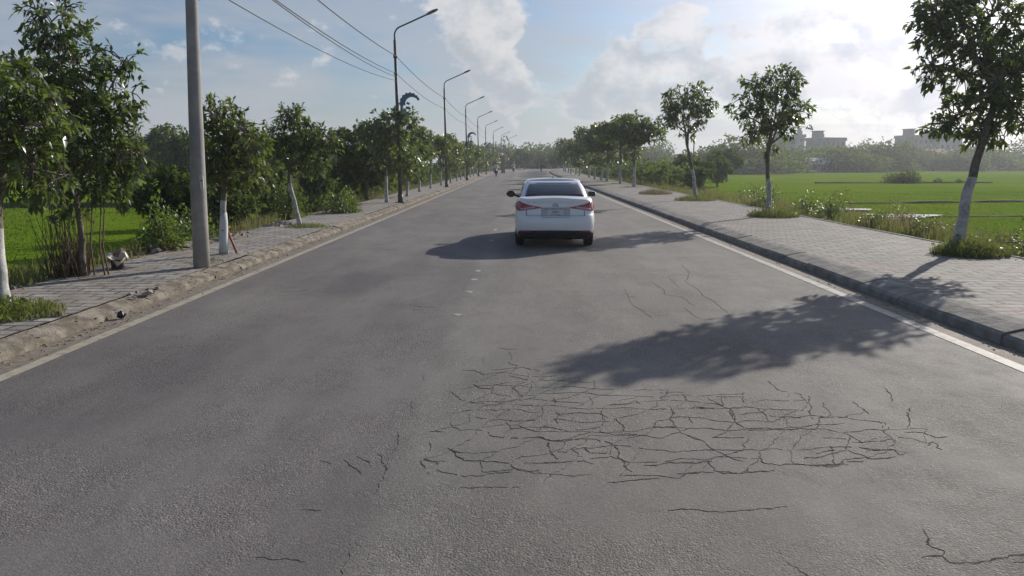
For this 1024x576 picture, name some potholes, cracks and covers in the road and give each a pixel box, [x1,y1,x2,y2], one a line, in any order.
crack [420,348,948,488]
crack [653,266,728,318]
crack [324,435,400,495]
crack [922,530,1024,564]
